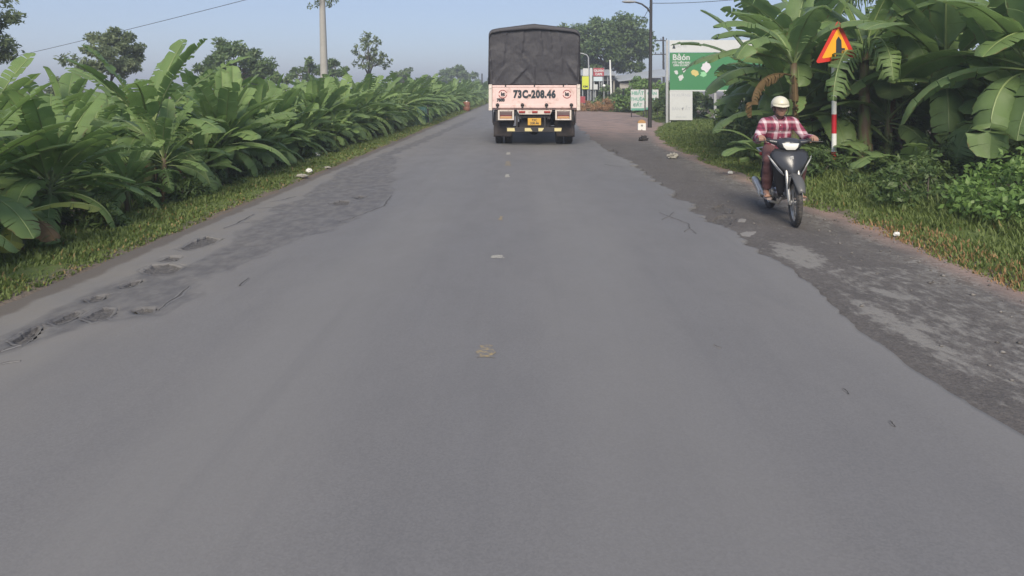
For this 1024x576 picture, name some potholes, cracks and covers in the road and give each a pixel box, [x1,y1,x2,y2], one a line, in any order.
pothole [131,306,157,314]
crack [159,286,191,310]
pothole [5,323,43,347]
pothole [79,305,118,324]
crack [659,212,696,234]
pothole [84,295,106,304]
crack [225,196,297,228]
pothole [46,309,86,327]
pothole [138,262,187,276]
pothole [176,235,224,251]
